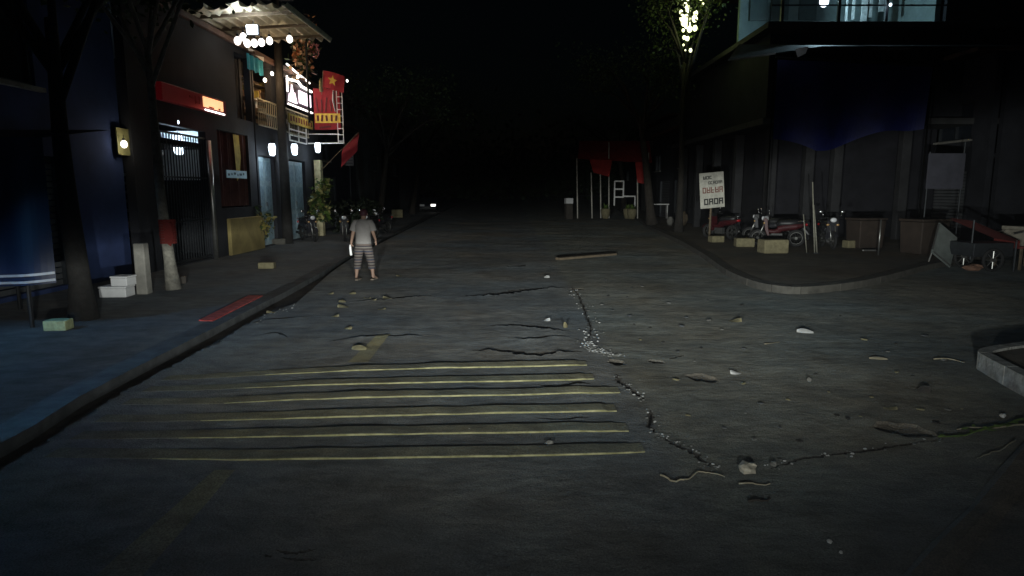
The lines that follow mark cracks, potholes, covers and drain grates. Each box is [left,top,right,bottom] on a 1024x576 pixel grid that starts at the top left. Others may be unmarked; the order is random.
crack [478,324,583,356]
crack [475,287,550,296]
